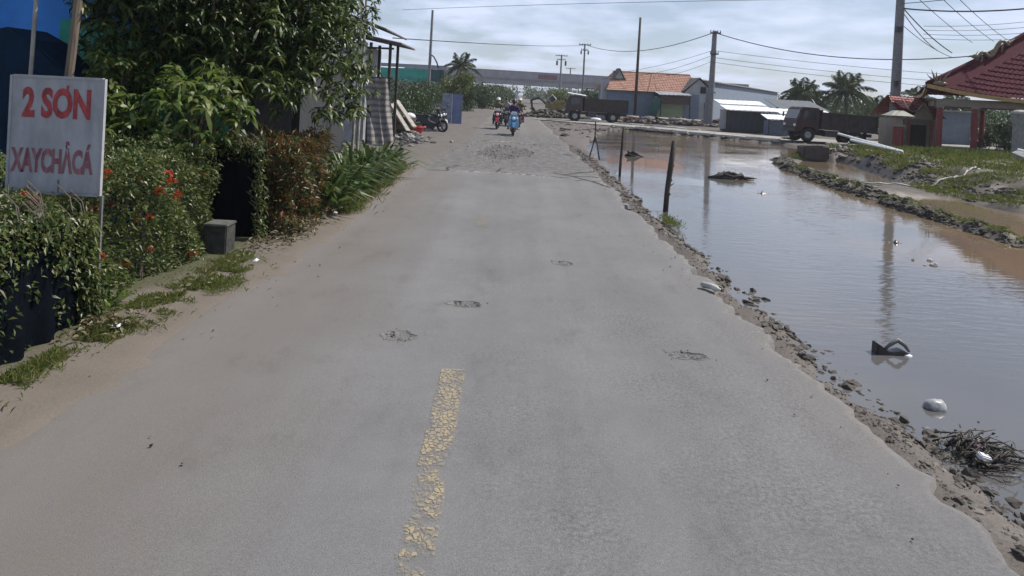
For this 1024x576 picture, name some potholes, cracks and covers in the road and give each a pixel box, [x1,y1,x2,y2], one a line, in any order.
pothole [369,328,425,342]
pothole [664,349,717,360]
